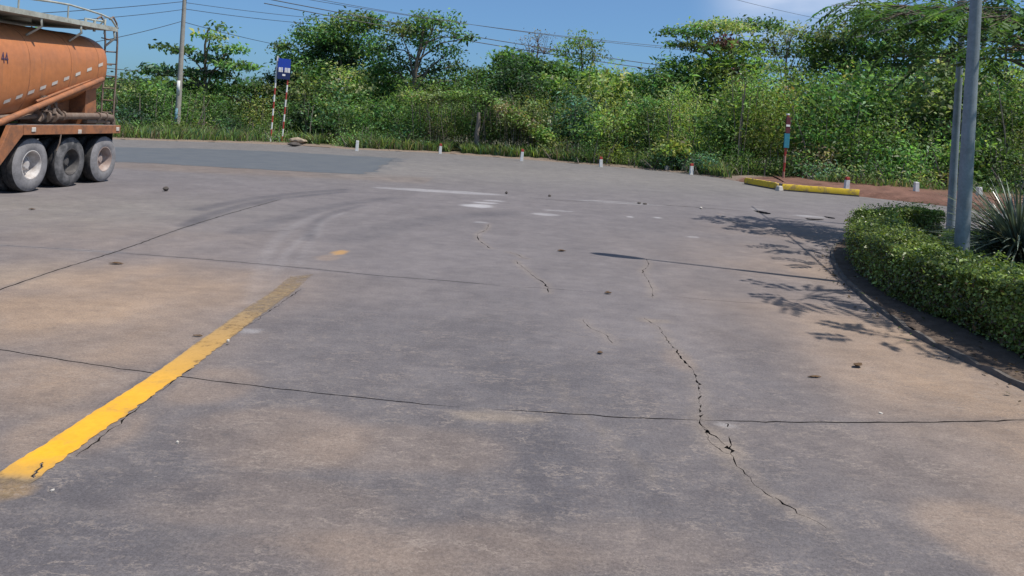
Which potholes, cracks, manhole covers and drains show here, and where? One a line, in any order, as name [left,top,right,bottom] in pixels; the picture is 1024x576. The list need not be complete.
crack [649,321,826,528]
